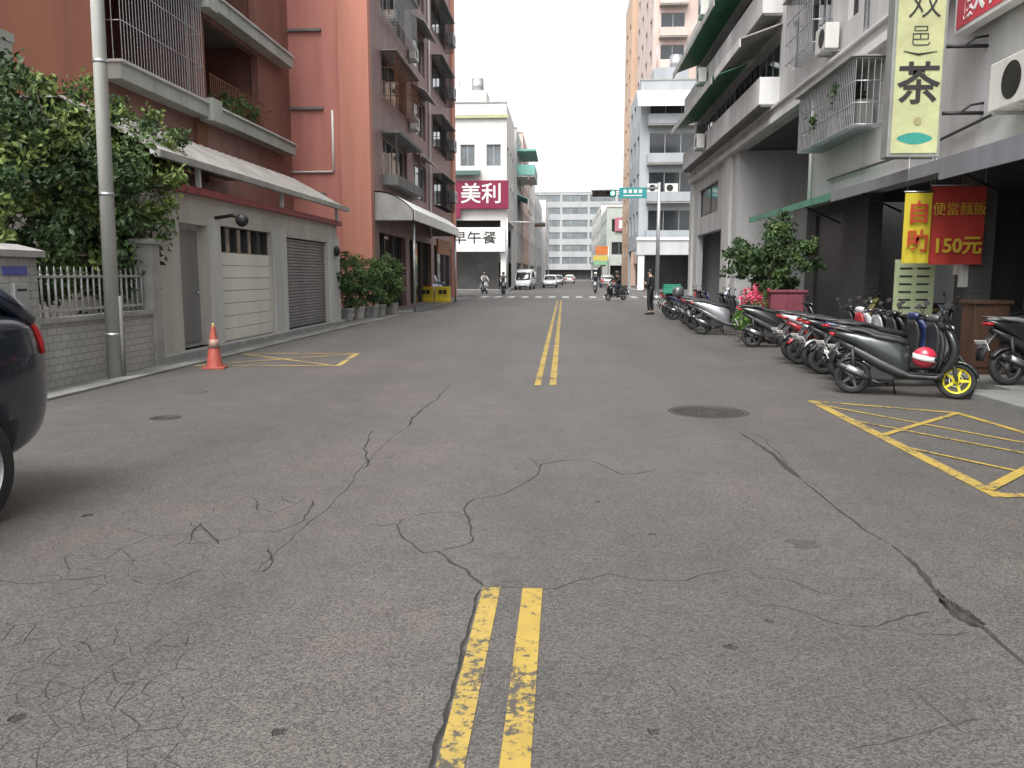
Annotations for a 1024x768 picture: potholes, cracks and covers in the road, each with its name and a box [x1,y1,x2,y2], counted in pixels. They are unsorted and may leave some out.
crack [363,430,393,469]
crack [407,386,449,427]
crack [372,433,1024,768]
crack [0,491,318,768]
manhole cover [668,405,750,419]
